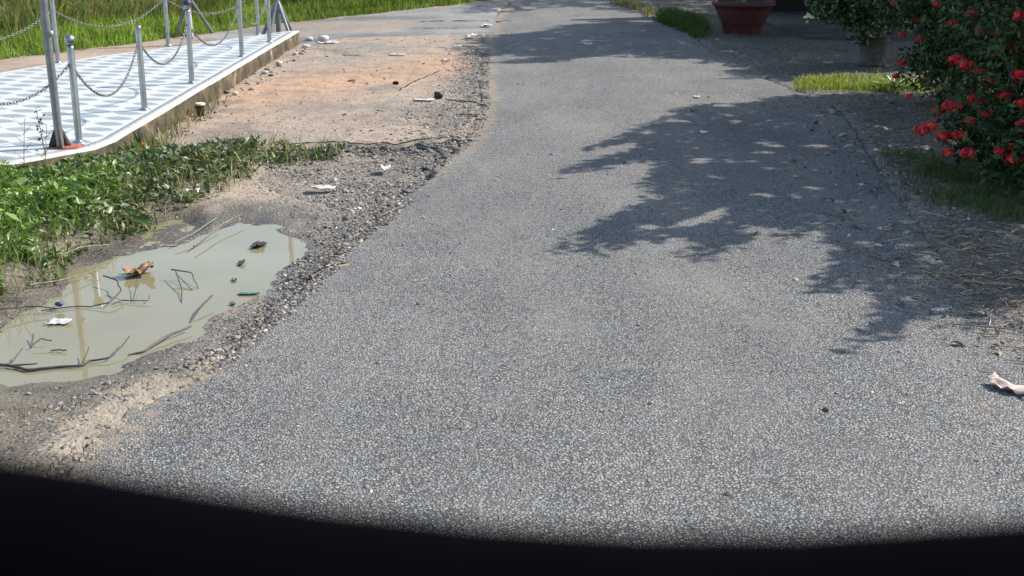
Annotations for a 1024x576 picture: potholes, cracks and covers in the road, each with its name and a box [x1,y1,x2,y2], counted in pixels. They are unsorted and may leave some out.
crack [399,70,489,118]
pothole [0,213,331,393]
